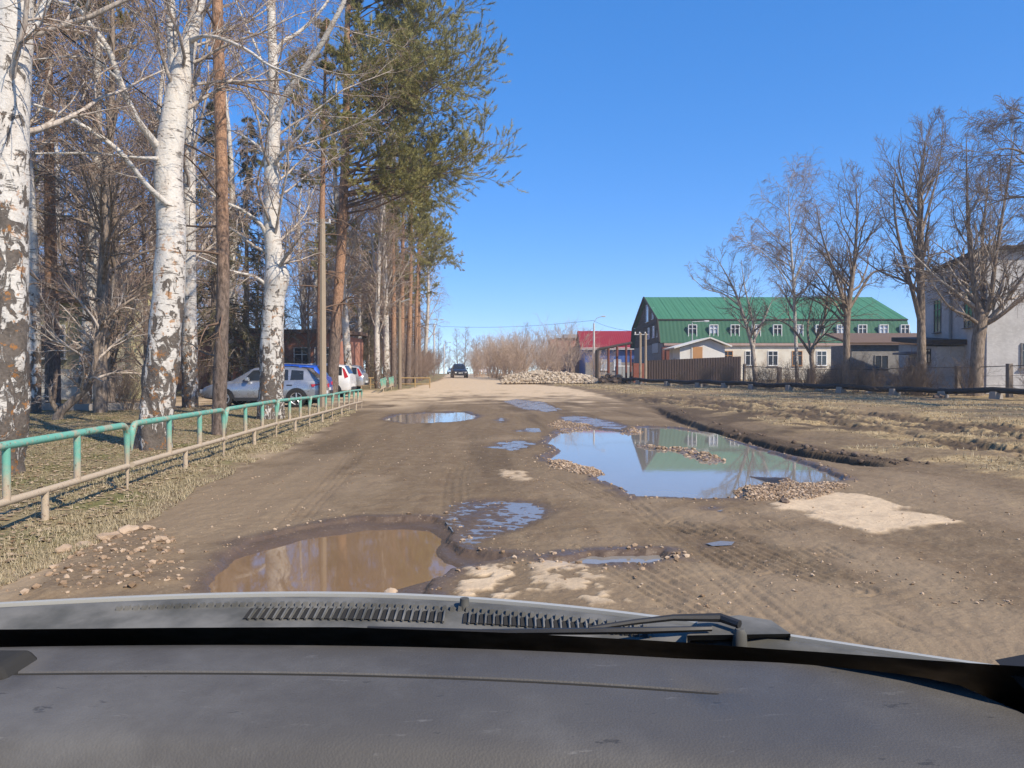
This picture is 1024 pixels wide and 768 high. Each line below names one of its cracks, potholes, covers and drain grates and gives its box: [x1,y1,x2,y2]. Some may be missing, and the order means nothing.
pothole [533,546,674,566]
pothole [530,425,864,502]
pothole [374,411,487,424]
pothole [183,513,537,595]
